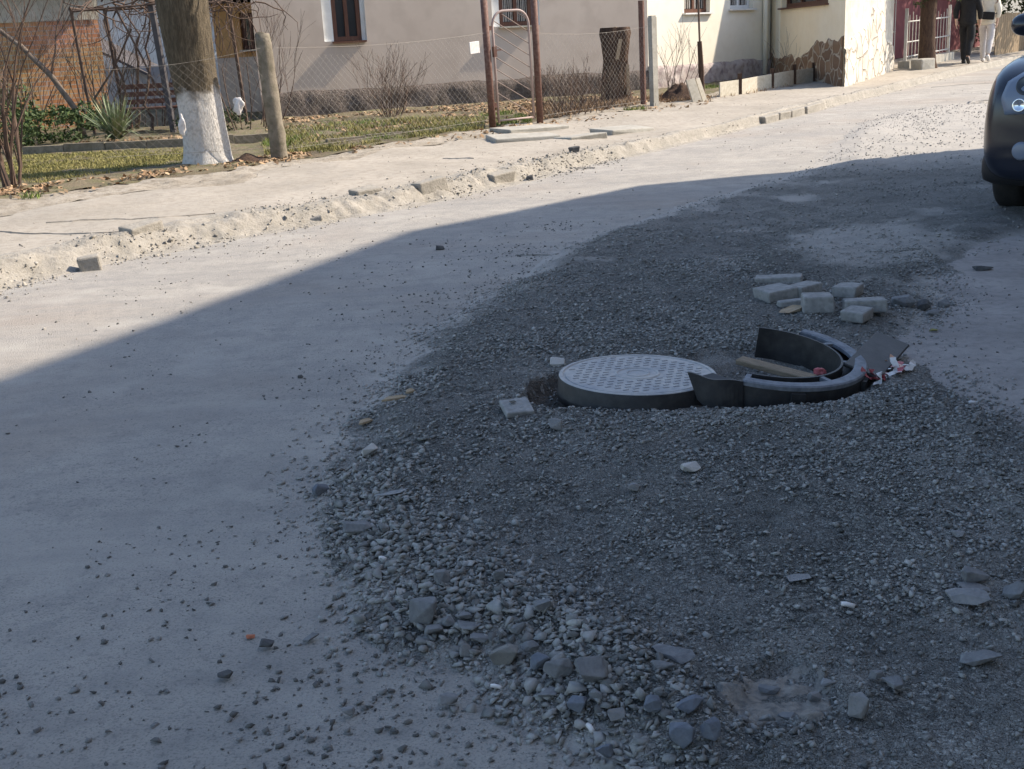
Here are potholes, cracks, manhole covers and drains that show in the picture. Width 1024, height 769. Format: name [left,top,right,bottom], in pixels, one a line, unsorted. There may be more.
manhole cover [557,354,717,411]
